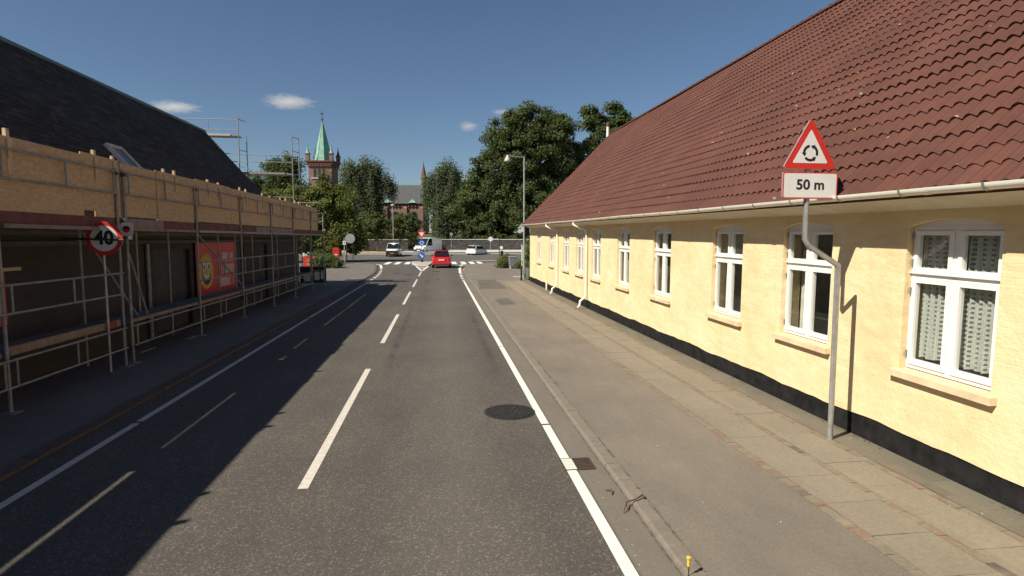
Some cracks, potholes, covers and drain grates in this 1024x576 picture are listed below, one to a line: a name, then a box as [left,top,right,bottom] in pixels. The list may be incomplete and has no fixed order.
drain grate [559,457,596,471]
manhole cover [484,404,535,420]
